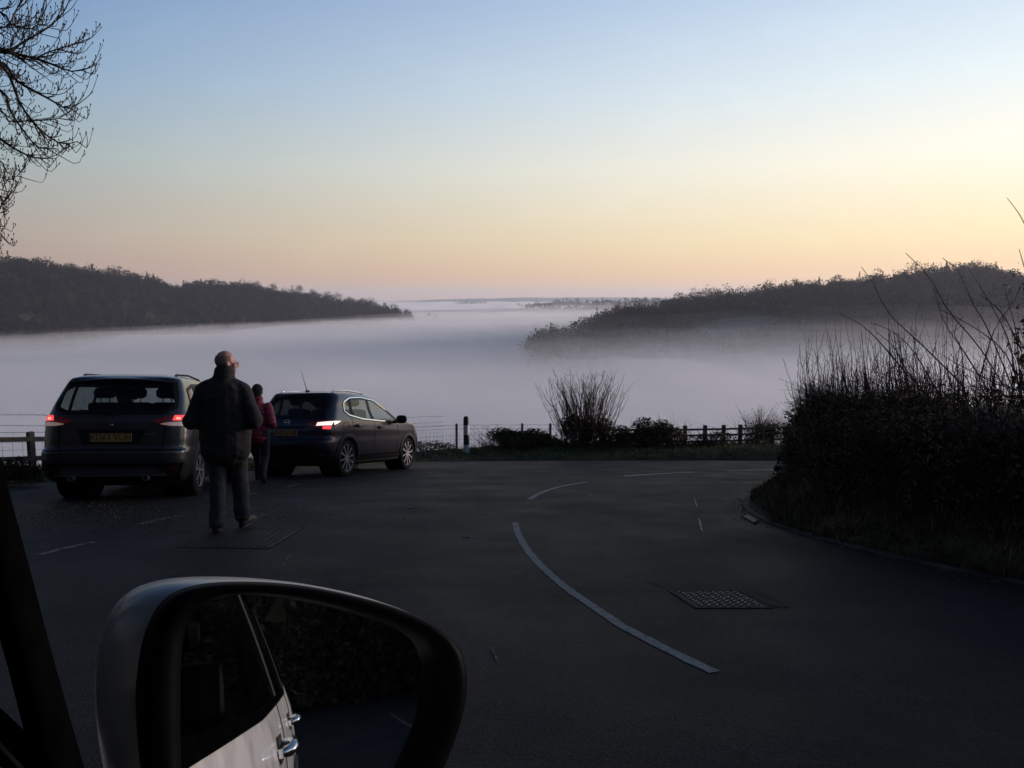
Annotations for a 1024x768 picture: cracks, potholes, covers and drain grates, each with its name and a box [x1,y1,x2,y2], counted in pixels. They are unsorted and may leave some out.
manhole cover [669,590,774,608]
manhole cover [175,528,303,549]
drain grate [741,513,759,524]
